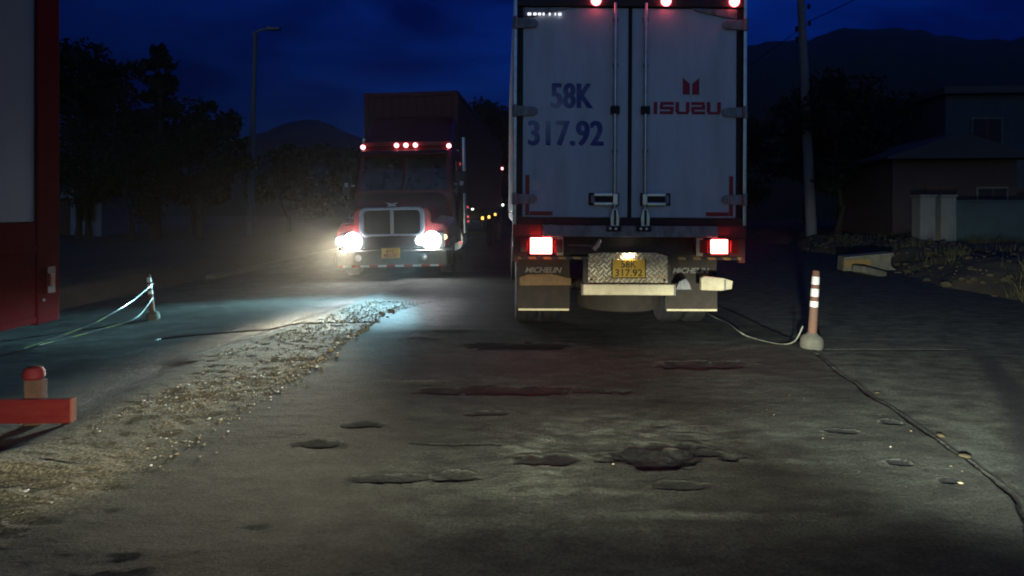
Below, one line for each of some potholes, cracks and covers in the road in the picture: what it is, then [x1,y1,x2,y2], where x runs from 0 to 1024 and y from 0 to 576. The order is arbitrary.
pothole [459,341,582,351]
pothole [294,439,341,450]
pothole [429,469,483,483]
pothole [589,441,752,472]
pothole [463,409,517,417]
pothole [878,418,906,426]
pothole [510,453,583,467]
pothole [410,384,643,396]
pothole [647,360,748,370]
pothole [345,473,430,485]
pothole [936,476,963,485]
pothole [339,420,387,429]
